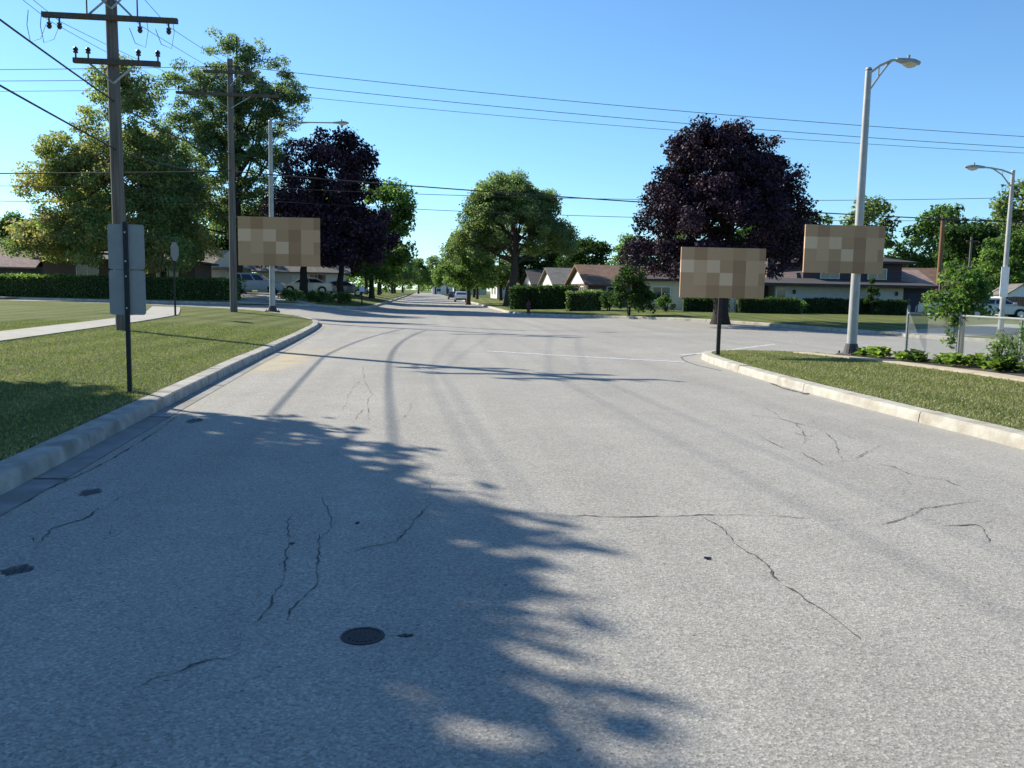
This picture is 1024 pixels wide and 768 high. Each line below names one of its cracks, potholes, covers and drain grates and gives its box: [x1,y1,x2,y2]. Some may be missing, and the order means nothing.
crack [19,493,140,560]
pothole [0,564,34,577]
pothole [76,488,102,497]
crack [360,485,430,549]
manhole cover [340,627,385,645]
crack [574,413,997,638]
crack [134,499,332,688]
